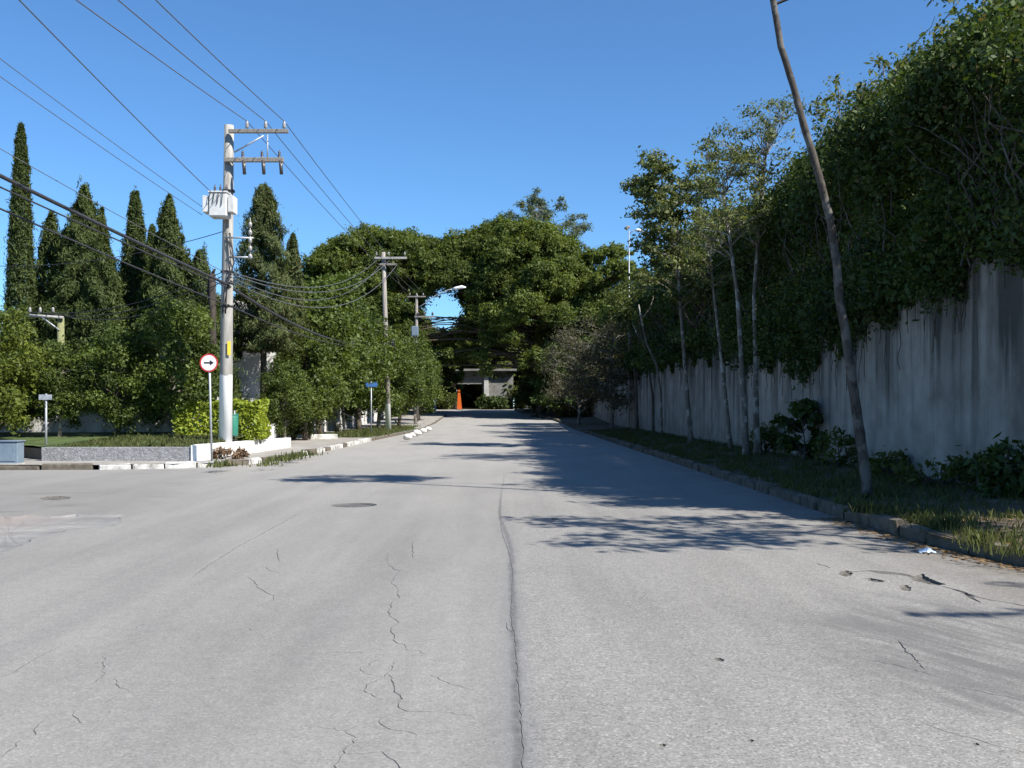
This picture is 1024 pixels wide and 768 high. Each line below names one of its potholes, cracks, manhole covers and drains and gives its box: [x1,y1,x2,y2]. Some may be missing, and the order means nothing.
crack [864,637,935,676]
crack [2,655,129,757]
crack [321,542,474,768]
pothole [910,574,946,586]
